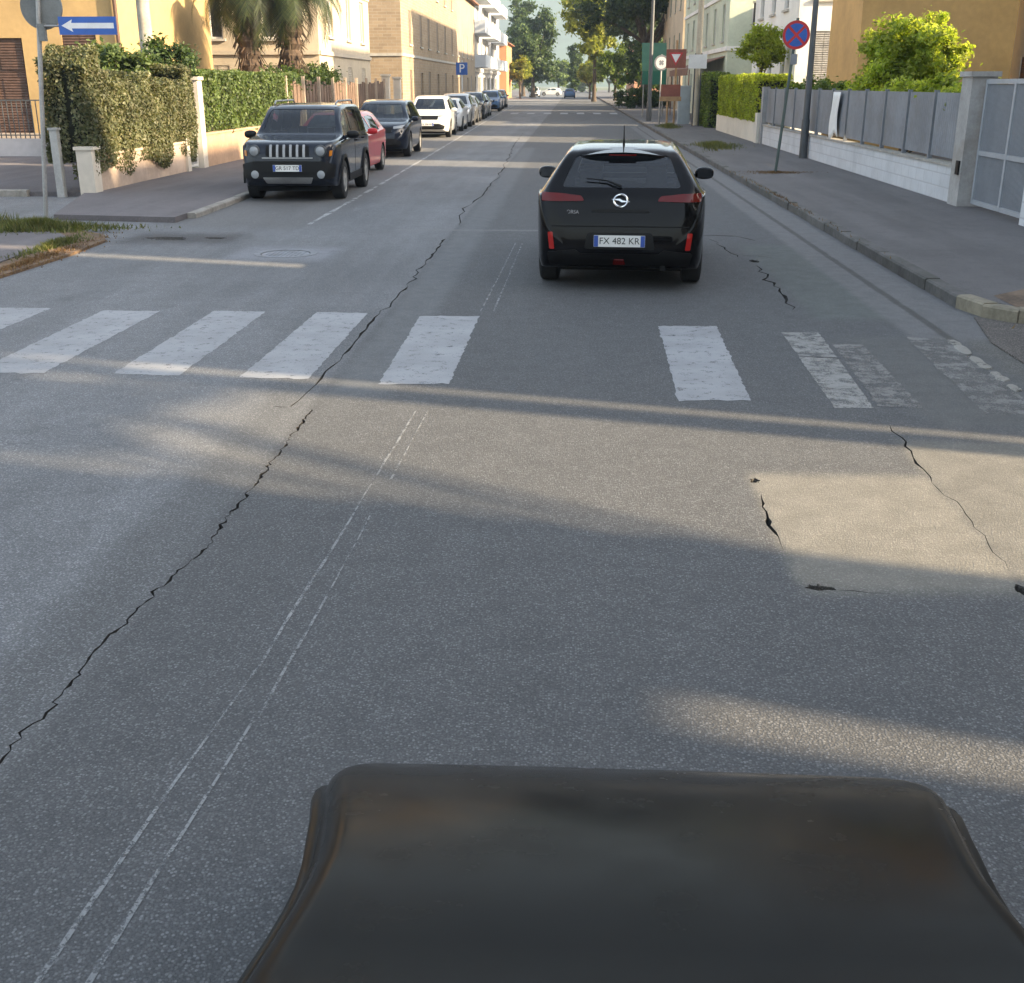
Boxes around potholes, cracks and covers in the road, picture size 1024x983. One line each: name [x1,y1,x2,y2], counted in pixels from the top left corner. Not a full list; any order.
crack [0,133,523,764]
crack [761,495,782,546]
crack [708,235,795,309]
manhole cover [254,249,317,258]
